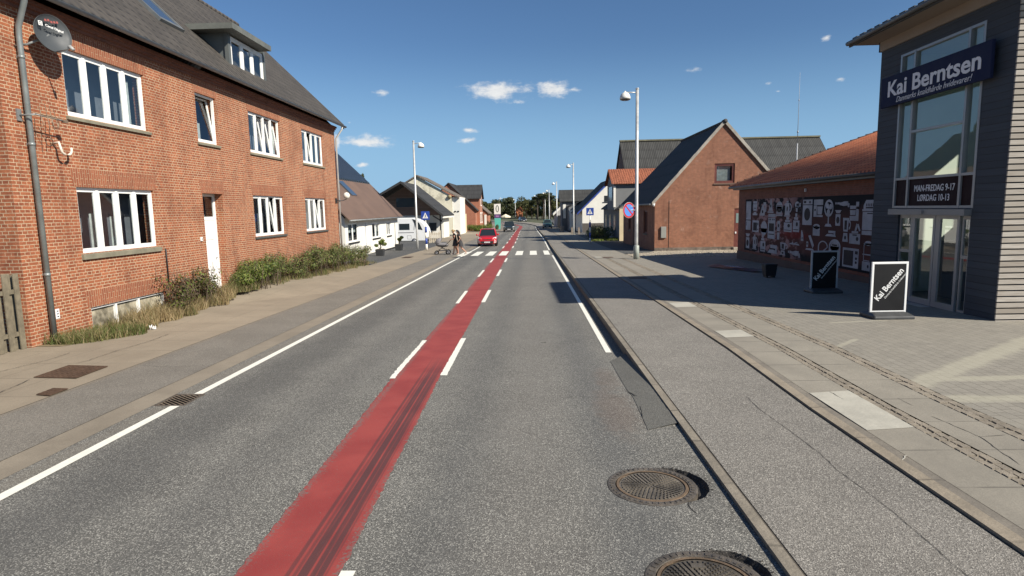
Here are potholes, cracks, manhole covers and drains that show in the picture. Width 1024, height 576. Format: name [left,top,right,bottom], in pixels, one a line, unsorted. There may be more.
utility cover [36,388,68,396]
manhole cover [644,551,760,576]
utility cover [35,365,108,378]
drain grate [154,394,205,406]
manhole cover [607,468,698,506]
